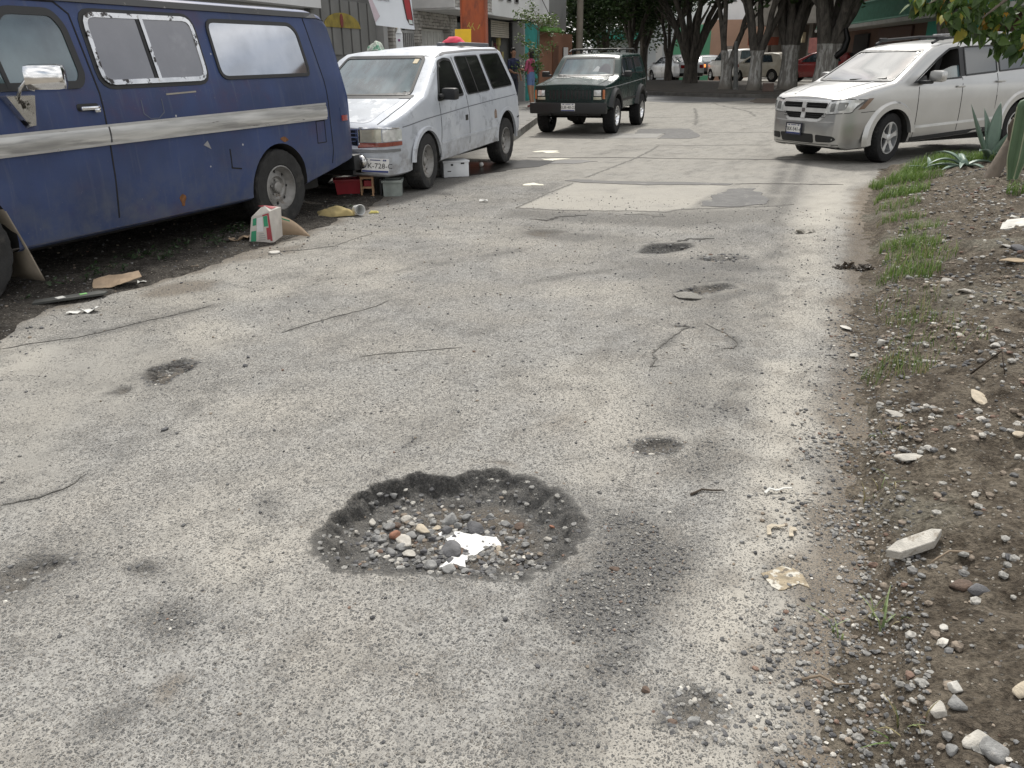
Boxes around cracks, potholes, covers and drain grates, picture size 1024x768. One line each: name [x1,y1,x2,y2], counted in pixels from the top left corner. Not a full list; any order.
pothole [608,430,700,465]
pothole [631,241,702,257]
crack [362,347,462,357]
pothole [662,281,749,301]
pothole [624,668,759,752]
pothole [124,354,212,393]
crack [0,475,84,506]
crack [281,300,389,333]
crack [2,306,207,349]
pothole [282,461,612,598]
crack [650,323,738,367]
